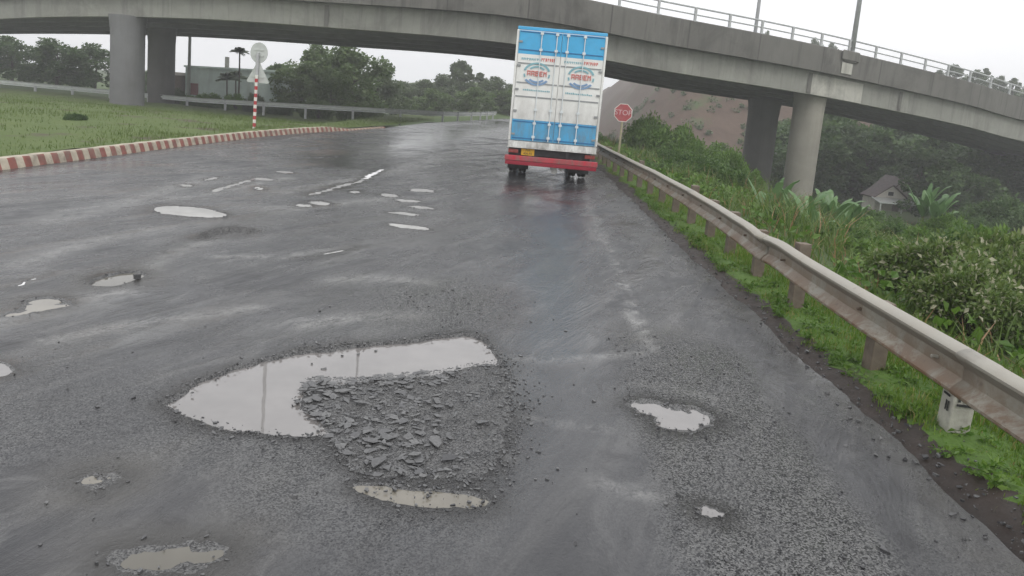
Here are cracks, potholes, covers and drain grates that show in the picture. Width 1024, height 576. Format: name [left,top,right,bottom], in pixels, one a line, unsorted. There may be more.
pothole [162,333,513,480]
pothole [0,361,16,377]
pothole [194,226,261,239]
pothole [89,270,146,286]
pothole [351,482,492,509]
pothole [153,205,227,218]
pothole [105,540,229,576]
pothole [1,297,74,317]
pothole [78,472,122,491]
pothole [625,398,716,433]
pothole [697,504,726,519]
